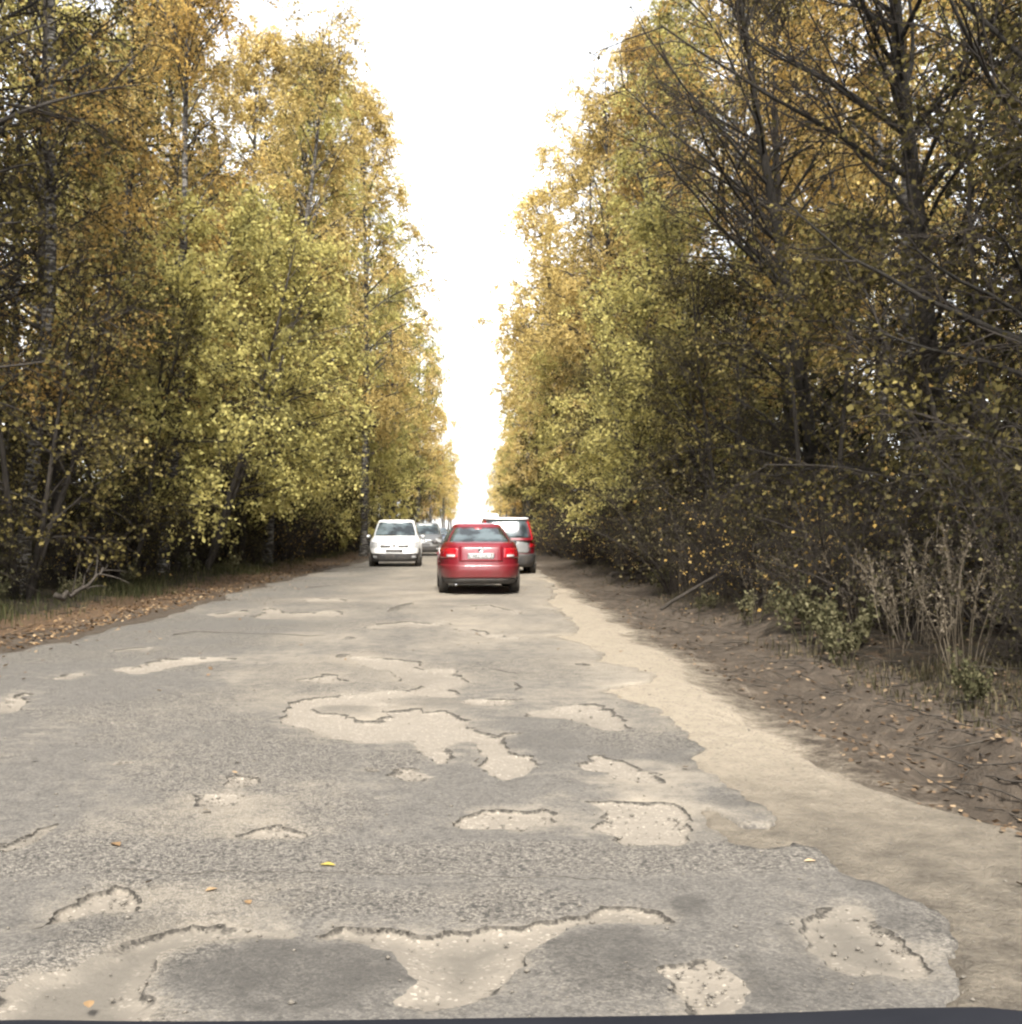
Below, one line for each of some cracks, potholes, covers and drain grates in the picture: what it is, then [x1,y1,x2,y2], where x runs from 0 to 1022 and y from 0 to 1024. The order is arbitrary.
pothole [113,657,238,674]
pothole [231,824,308,840]
pothole [798,905,934,981]
pothole [315,905,675,1011]
pothole [584,800,694,846]
pothole [249,607,343,619]
pothole [525,703,631,731]
pothole [34,884,142,929]
pothole [0,924,298,1021]
pothole [279,657,545,781]
pothole [452,808,558,832]
pothole [192,792,242,807]
